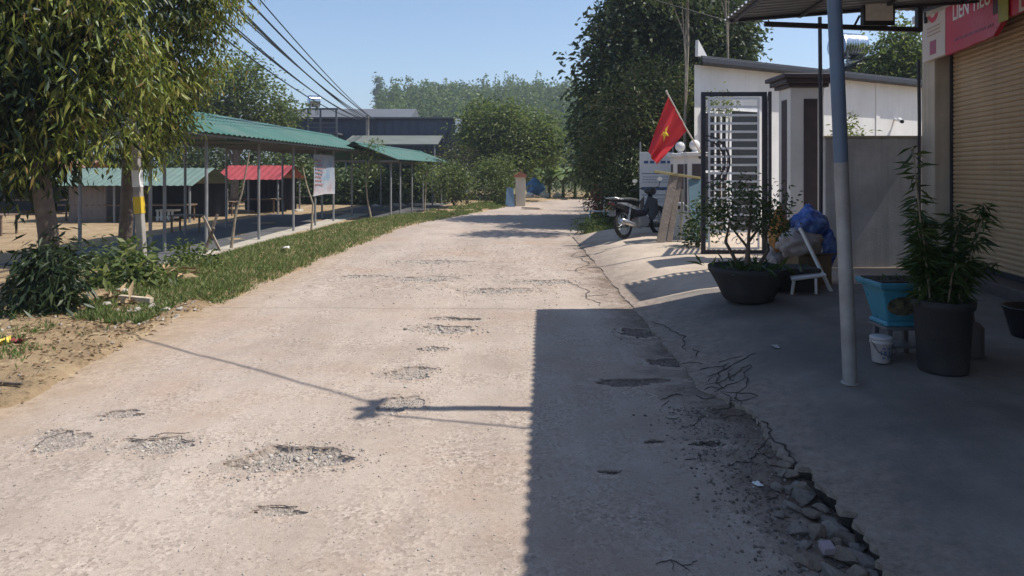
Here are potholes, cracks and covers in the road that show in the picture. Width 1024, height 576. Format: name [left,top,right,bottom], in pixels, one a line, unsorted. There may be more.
pothole [364,392,432,423]
pothole [638,357,686,370]
pothole [91,433,212,459]
crack [652,321,797,500]
pothole [409,345,457,353]
pothole [169,435,385,486]
pothole [577,377,693,390]
pothole [399,323,490,338]
pothole [9,425,114,465]
pothole [372,363,446,388]
pothole [611,327,658,340]
pothole [80,407,158,422]
